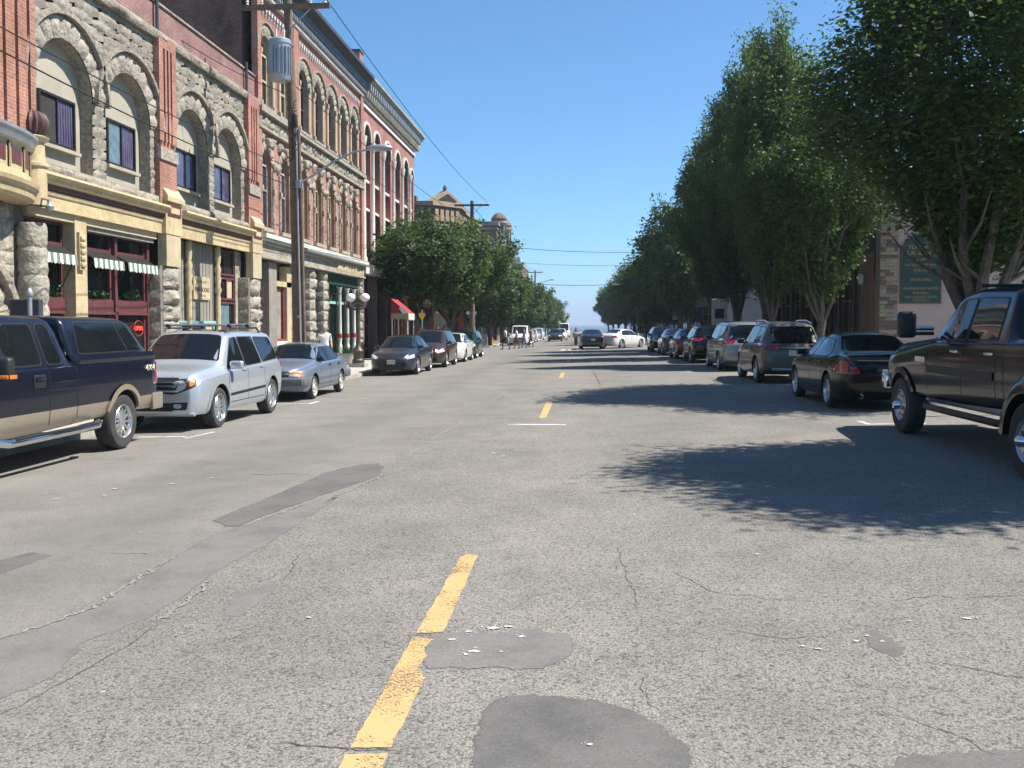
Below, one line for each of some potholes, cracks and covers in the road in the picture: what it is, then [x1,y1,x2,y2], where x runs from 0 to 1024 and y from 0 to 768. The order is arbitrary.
crack [0,474,383,714]
